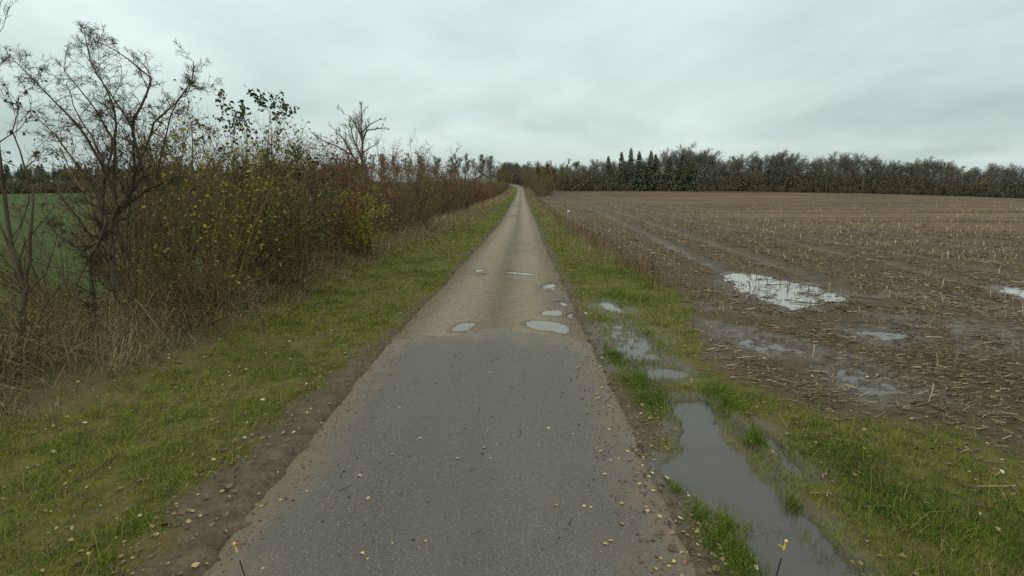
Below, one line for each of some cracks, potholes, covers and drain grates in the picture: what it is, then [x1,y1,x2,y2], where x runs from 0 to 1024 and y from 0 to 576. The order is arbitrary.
pothole [521,319,574,335]
pothole [447,322,479,332]
pothole [536,309,567,317]
